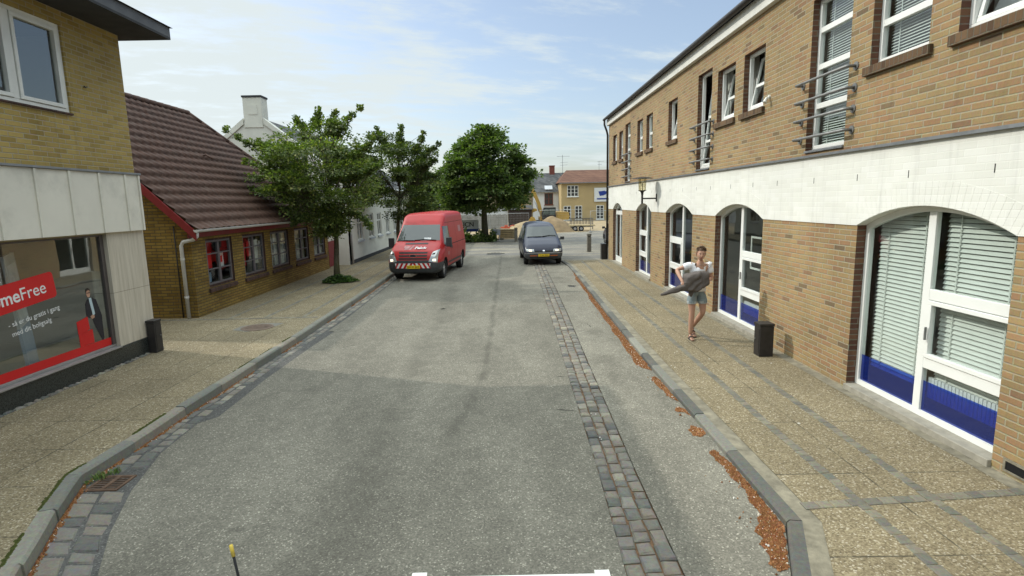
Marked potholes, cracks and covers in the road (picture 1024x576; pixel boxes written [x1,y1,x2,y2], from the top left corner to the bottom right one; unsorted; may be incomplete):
manhole cover [234,323,283,332]
drain grate [84,475,137,492]
